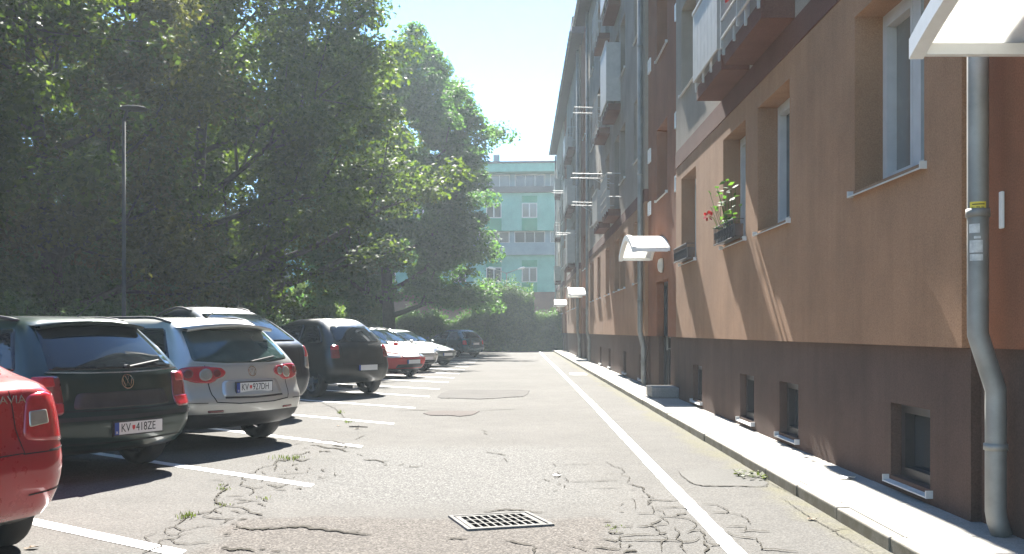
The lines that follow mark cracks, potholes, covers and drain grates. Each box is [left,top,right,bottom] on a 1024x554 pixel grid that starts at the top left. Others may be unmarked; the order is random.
crack [780,497,872,552]
crack [144,436,422,552]
crack [509,462,796,552]
drain grate [448,511,555,531]
